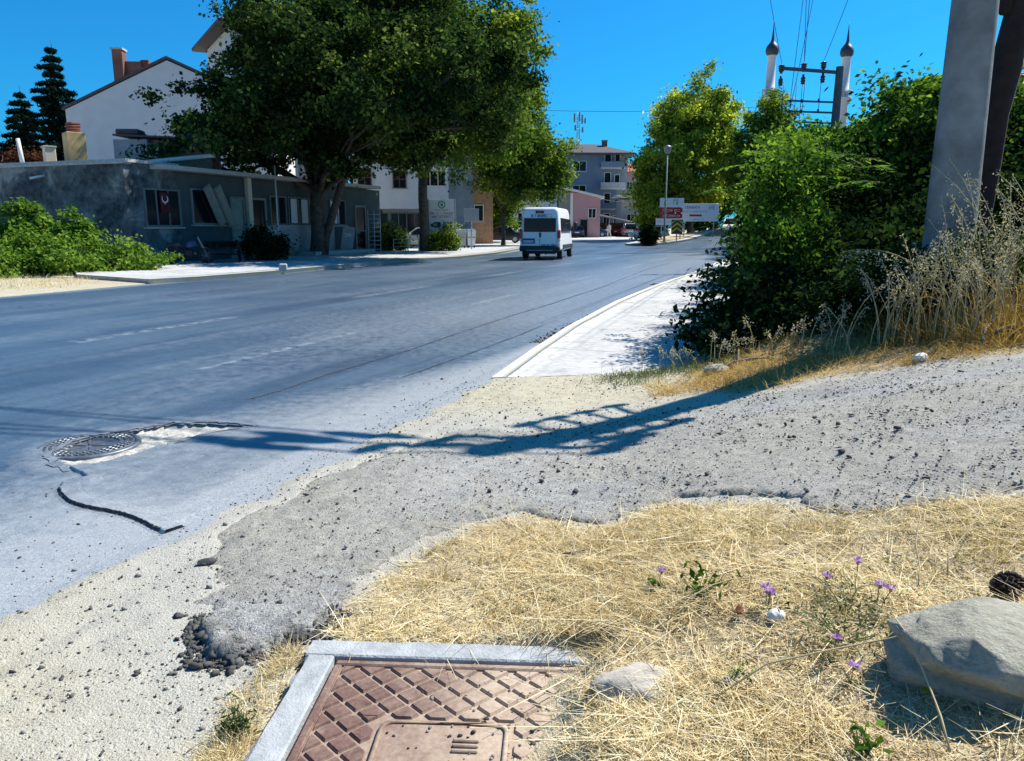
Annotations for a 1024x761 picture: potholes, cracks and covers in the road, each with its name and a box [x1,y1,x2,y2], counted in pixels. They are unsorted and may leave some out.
manhole cover [37,432,142,461]
manhole cover [243,640,597,761]
pothole [42,421,258,472]
